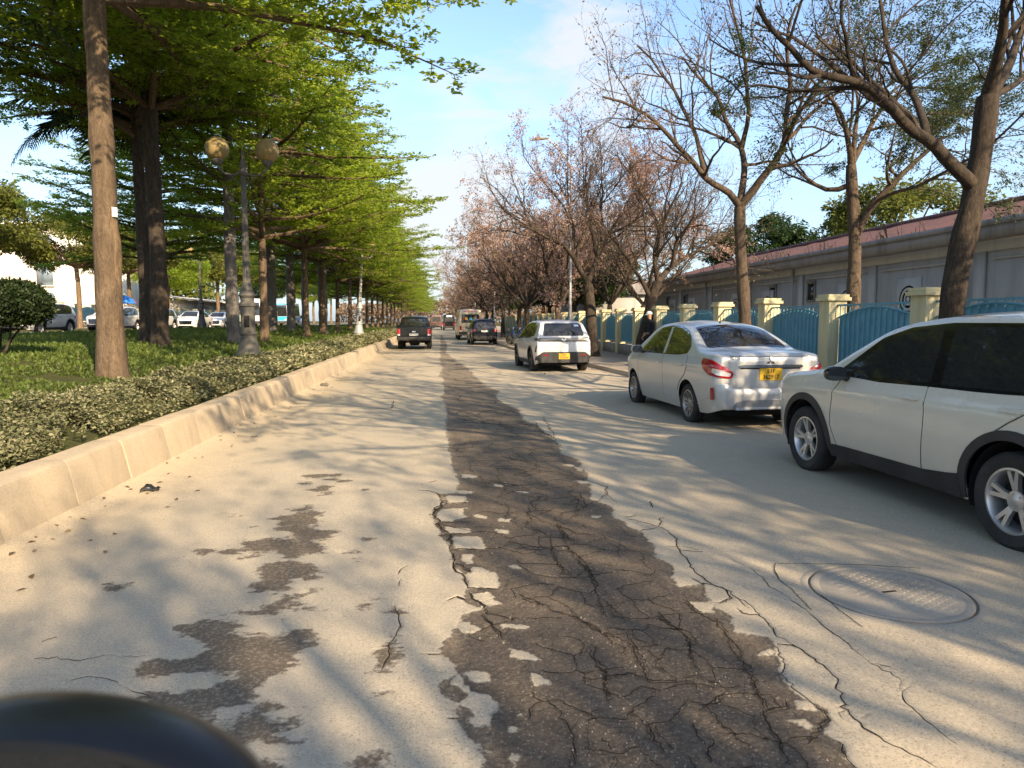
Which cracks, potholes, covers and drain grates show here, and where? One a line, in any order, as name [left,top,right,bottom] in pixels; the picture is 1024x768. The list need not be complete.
manhole cover [774,563,987,628]
crack [34,637,151,698]
crack [381,566,406,670]
crack [433,360,957,768]
crack [417,480,503,719]
